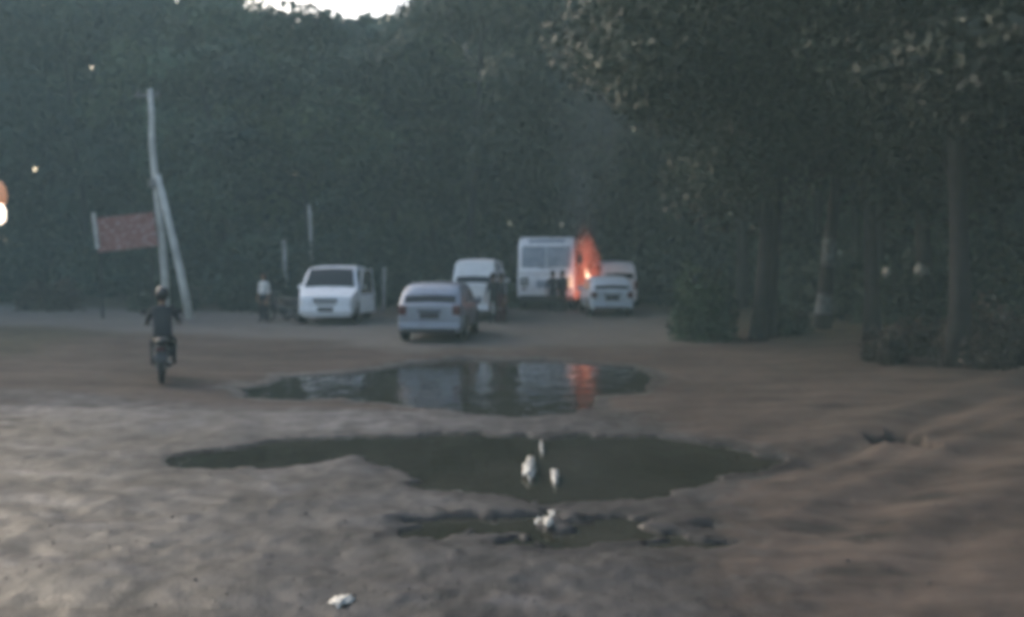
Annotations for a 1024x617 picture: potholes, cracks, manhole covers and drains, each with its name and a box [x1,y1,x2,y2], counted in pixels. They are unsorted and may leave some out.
pothole [151,430,790,506]
pothole [862,427,945,450]
pothole [397,505,739,549]
pothole [232,357,658,417]
